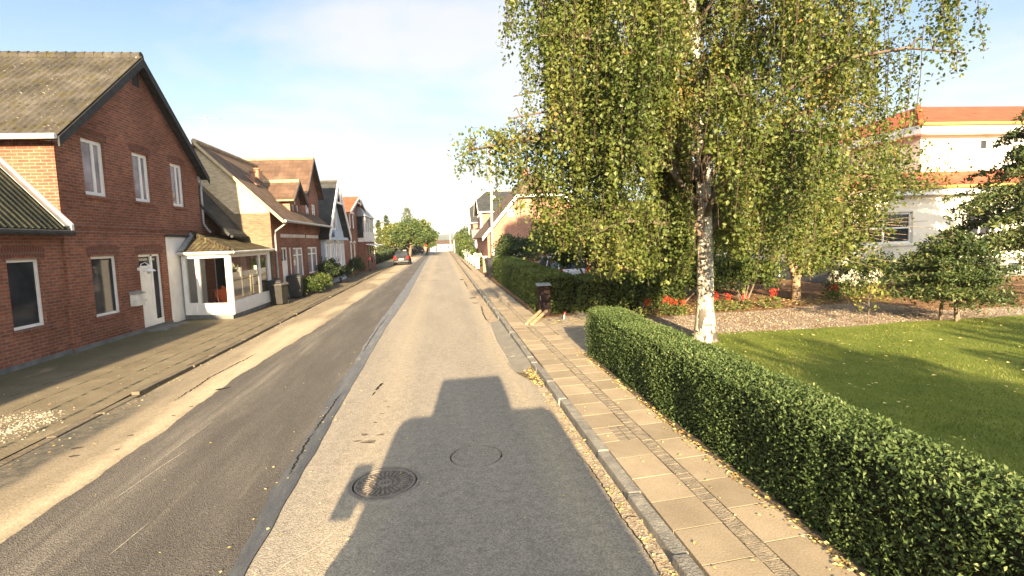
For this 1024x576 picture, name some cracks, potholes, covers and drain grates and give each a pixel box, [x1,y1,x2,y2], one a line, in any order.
manhole cover [347,466,421,501]
crack [289,394,341,474]
crack [174,356,251,401]
manhole cover [446,444,506,469]
